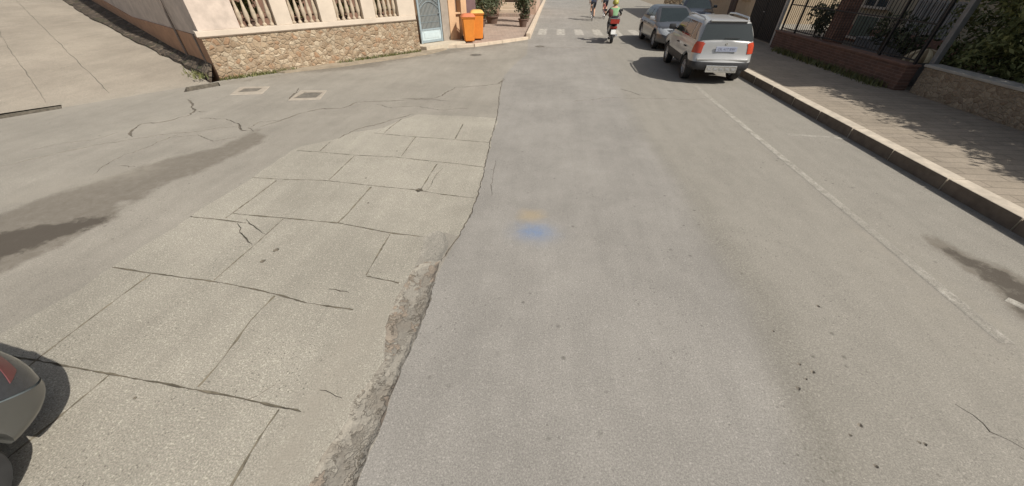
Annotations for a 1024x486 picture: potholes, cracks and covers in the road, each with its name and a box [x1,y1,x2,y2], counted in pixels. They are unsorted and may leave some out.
manhole cover [230,86,270,95]
crack [1,79,505,261]
crack [955,404,1024,449]
manhole cover [289,90,327,100]
pothole [309,261,440,486]
